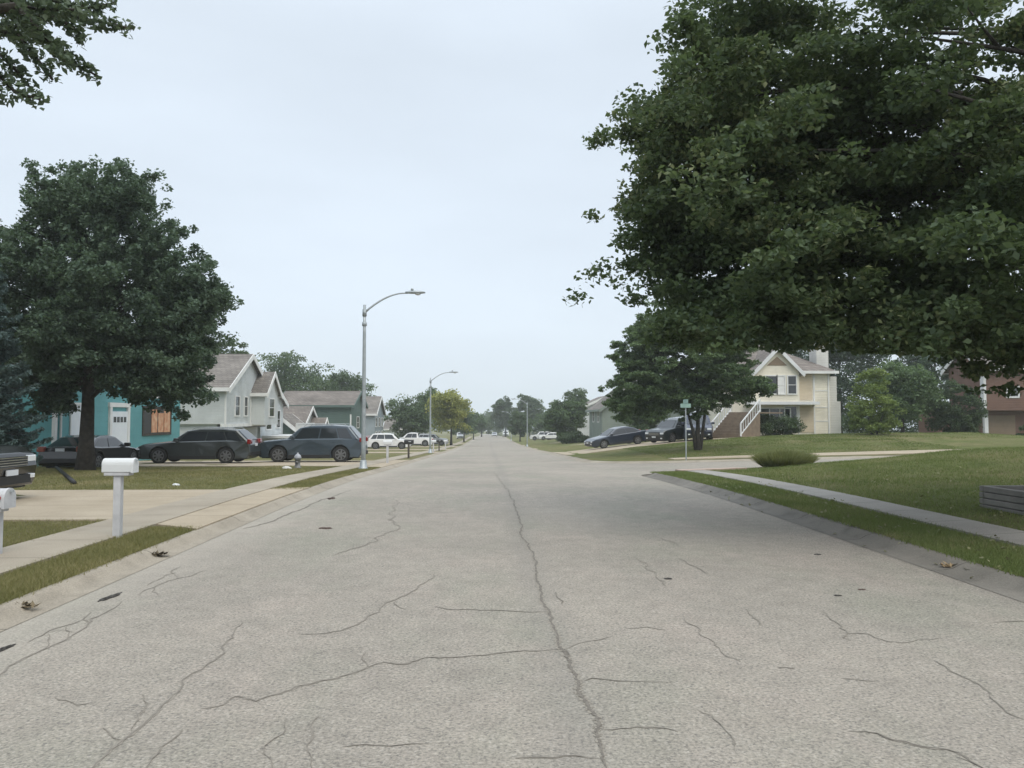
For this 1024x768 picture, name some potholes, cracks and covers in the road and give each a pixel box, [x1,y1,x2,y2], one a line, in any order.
crack [0,474,675,768]
crack [824,612,937,643]
crack [853,731,983,768]
crack [934,660,1023,719]
crack [683,615,741,662]
